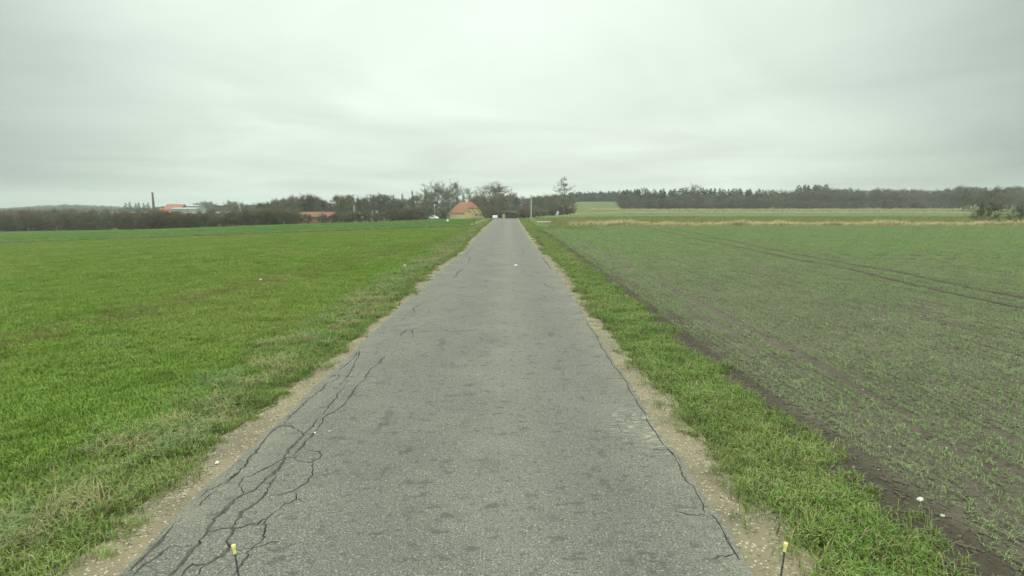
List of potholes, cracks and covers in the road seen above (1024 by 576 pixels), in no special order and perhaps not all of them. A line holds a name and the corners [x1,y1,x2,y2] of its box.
crack [130,350,385,576]
crack [585,321,740,560]
